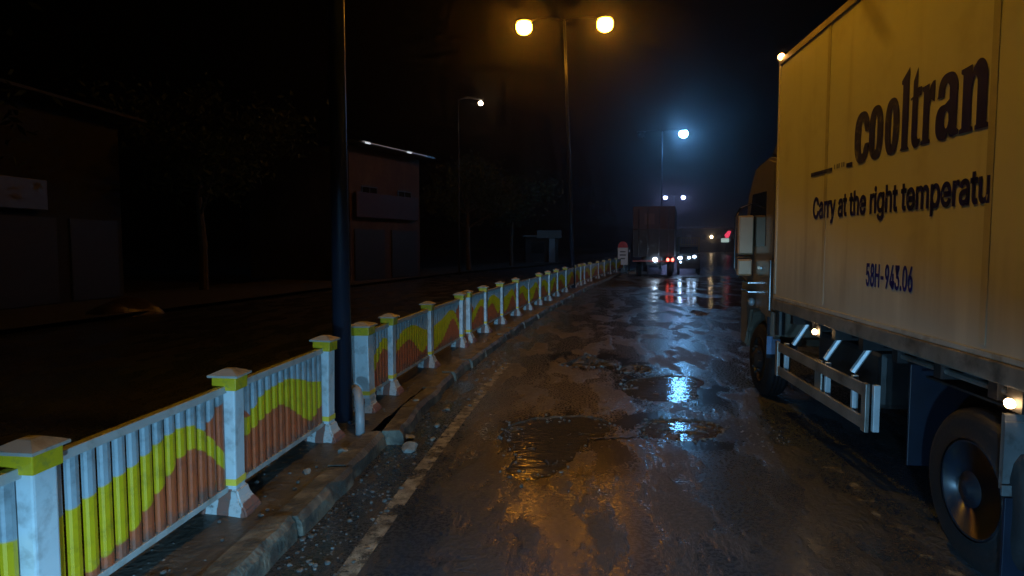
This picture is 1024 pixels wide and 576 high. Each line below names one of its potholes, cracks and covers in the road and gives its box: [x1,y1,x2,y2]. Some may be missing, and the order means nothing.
pothole [639,418,724,442]
pothole [500,415,611,482]
pothole [563,354,615,367]
pothole [621,376,705,403]
pothole [620,365,652,373]
